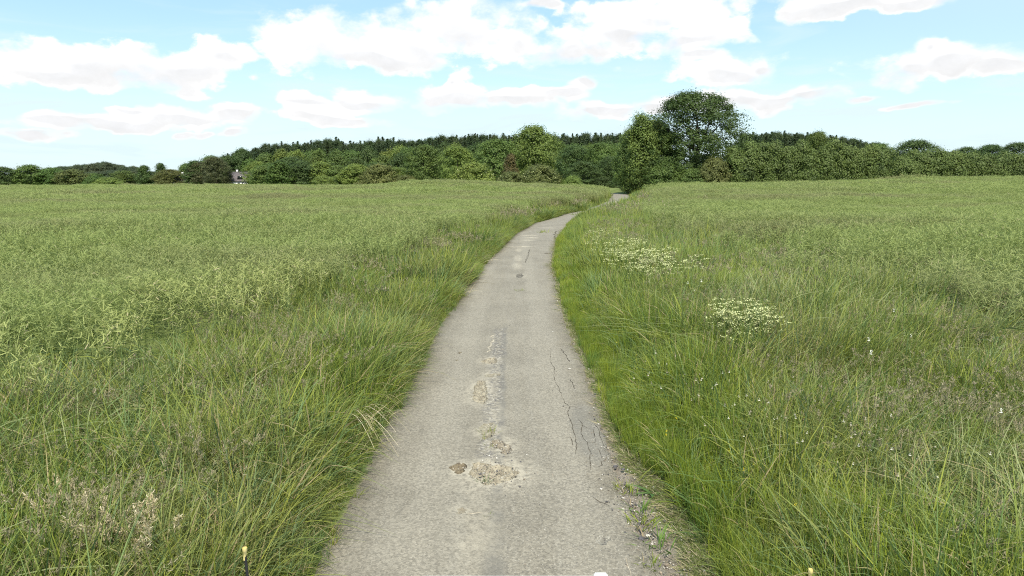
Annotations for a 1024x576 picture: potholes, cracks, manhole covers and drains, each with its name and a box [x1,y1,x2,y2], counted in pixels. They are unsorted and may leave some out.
pothole [449,463,467,474]
pothole [471,380,488,404]
pothole [469,462,520,486]
pothole [489,439,513,457]
crack [550,349,607,470]
